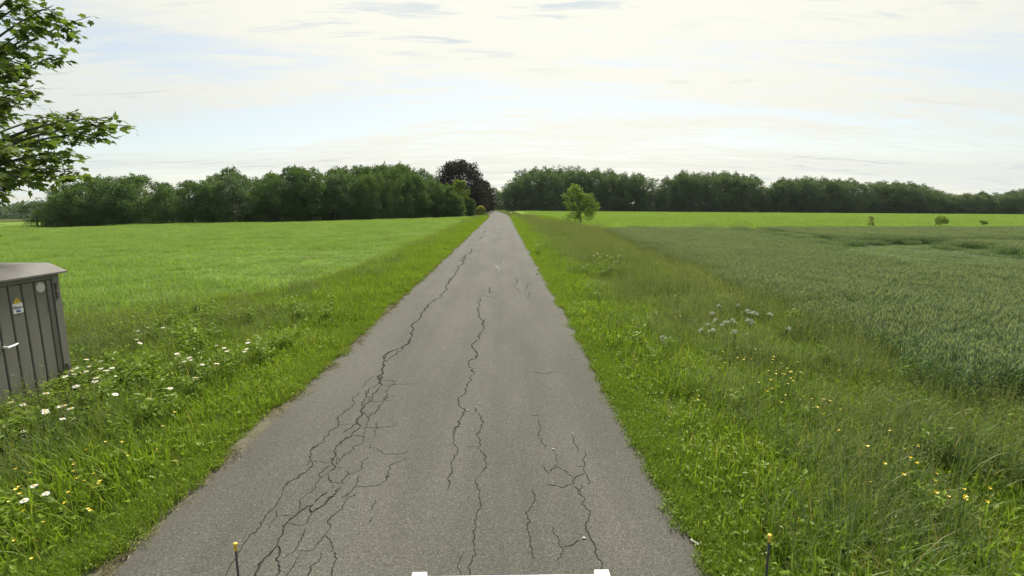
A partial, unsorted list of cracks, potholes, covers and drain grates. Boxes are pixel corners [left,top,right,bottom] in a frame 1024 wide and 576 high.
crack [525,415,603,570]
crack [447,287,495,576]
